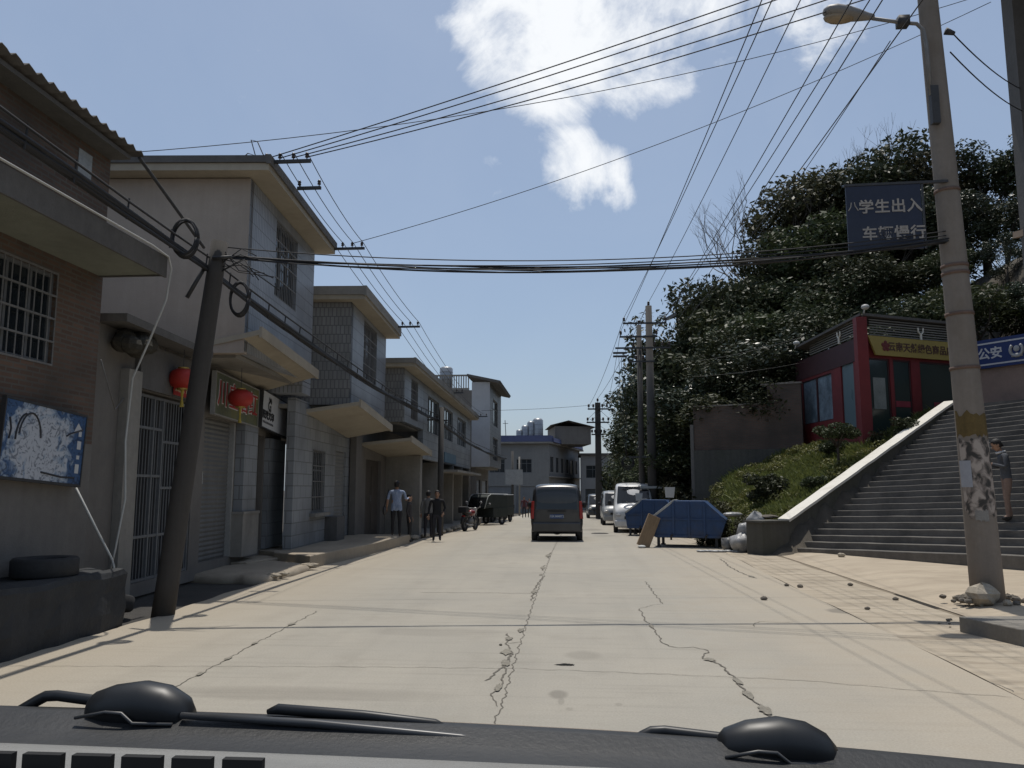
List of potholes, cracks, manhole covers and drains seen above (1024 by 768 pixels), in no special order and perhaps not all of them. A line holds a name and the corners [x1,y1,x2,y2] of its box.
crack [177,611,316,686]
pothole [548,661,583,669]
crack [484,535,561,724]
crack [639,583,772,716]
